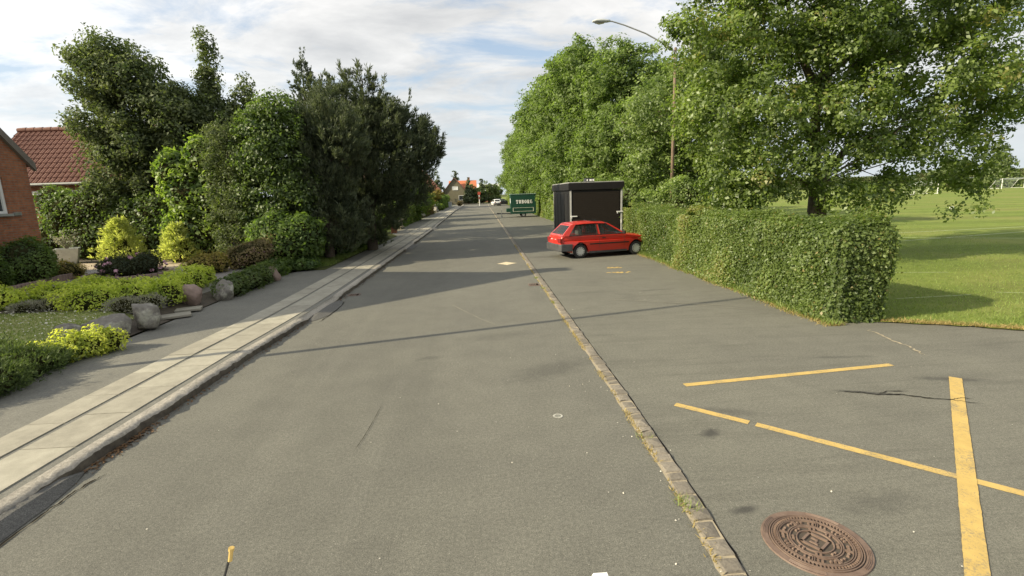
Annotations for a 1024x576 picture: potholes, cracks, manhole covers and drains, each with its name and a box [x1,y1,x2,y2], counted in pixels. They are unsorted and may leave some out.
manhole cover [761,511,875,576]
crack [845,391,975,403]
